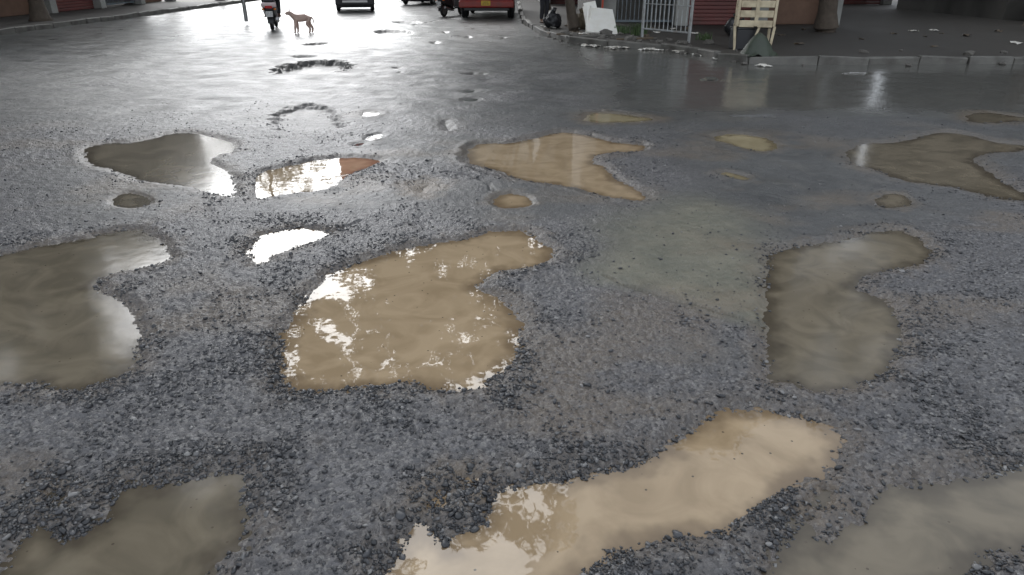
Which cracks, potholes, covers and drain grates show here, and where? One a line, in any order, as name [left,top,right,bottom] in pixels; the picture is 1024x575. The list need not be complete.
pothole [489,191,535,209]
pothole [107,191,154,208]
pothole [369,397,860,575]
pothole [257,58,363,76]
pothole [756,225,943,395]
pothole [76,129,243,198]
pothole [251,100,362,135]
pothole [0,454,265,575]
pothole [578,110,662,124]
pothole [840,129,1024,201]
pothole [241,223,333,265]
pothole [706,131,783,152]
